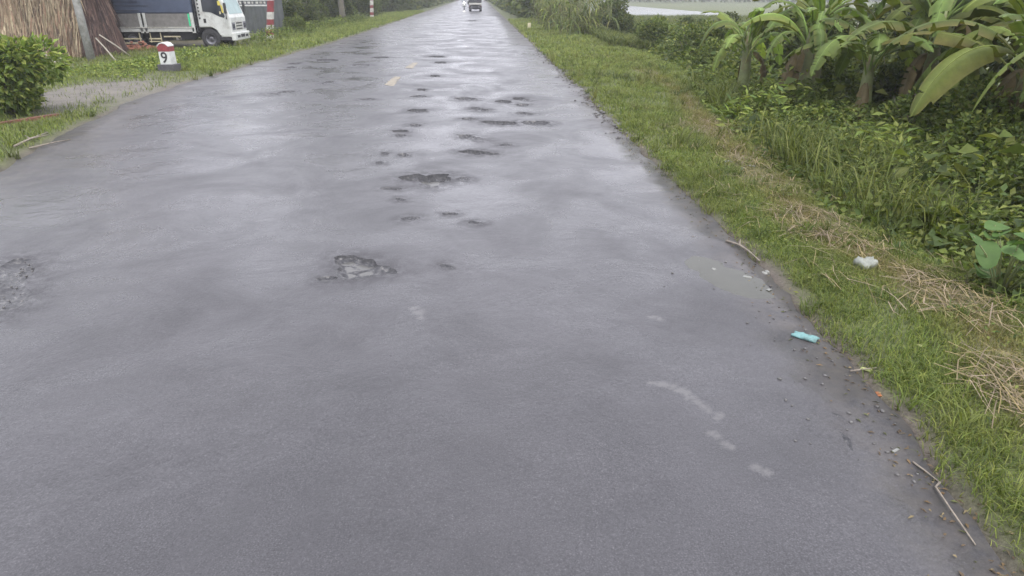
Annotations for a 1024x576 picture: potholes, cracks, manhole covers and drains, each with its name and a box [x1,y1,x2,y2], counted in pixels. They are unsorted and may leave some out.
pothole [0,258,36,316]
pothole [334,255,398,280]
pothole [398,173,452,188]
